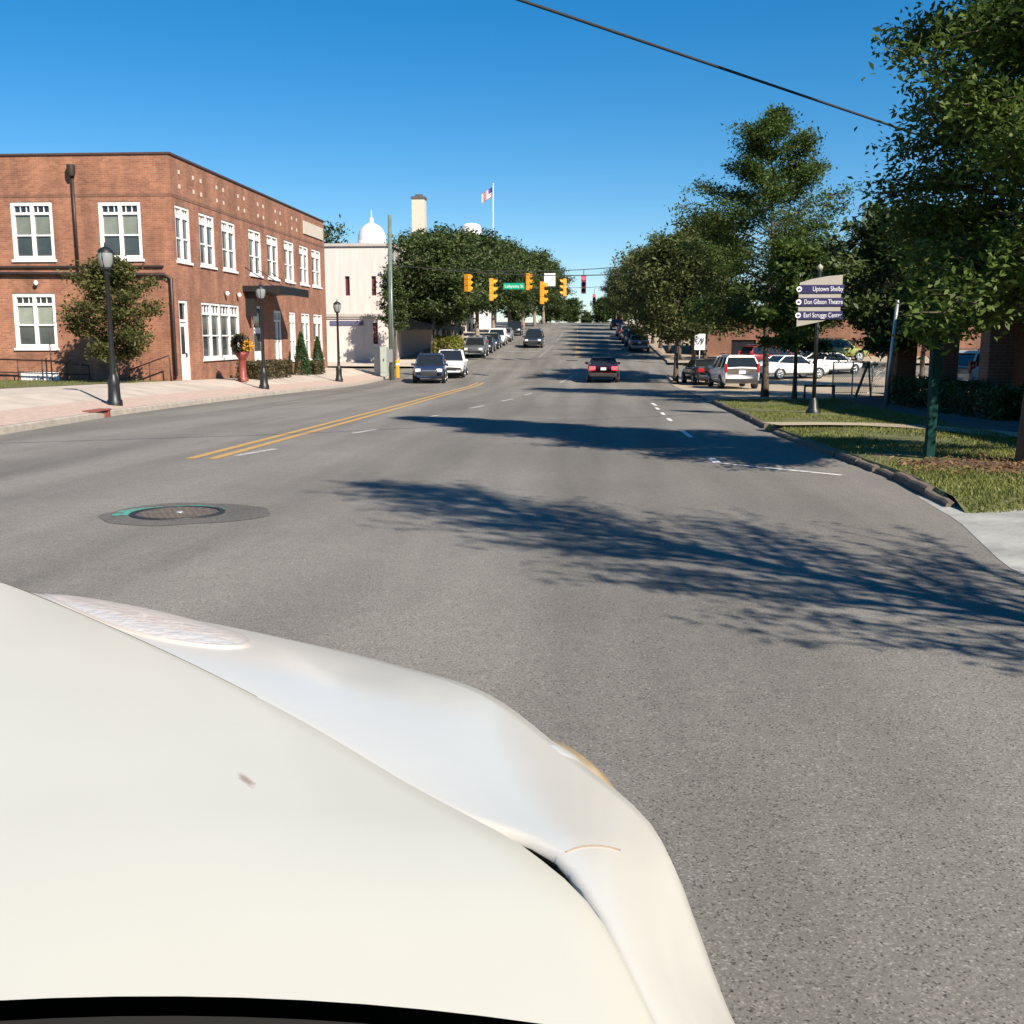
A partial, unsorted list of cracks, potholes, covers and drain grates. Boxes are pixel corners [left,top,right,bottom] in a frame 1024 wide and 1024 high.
manhole cover [98,503,270,526]
